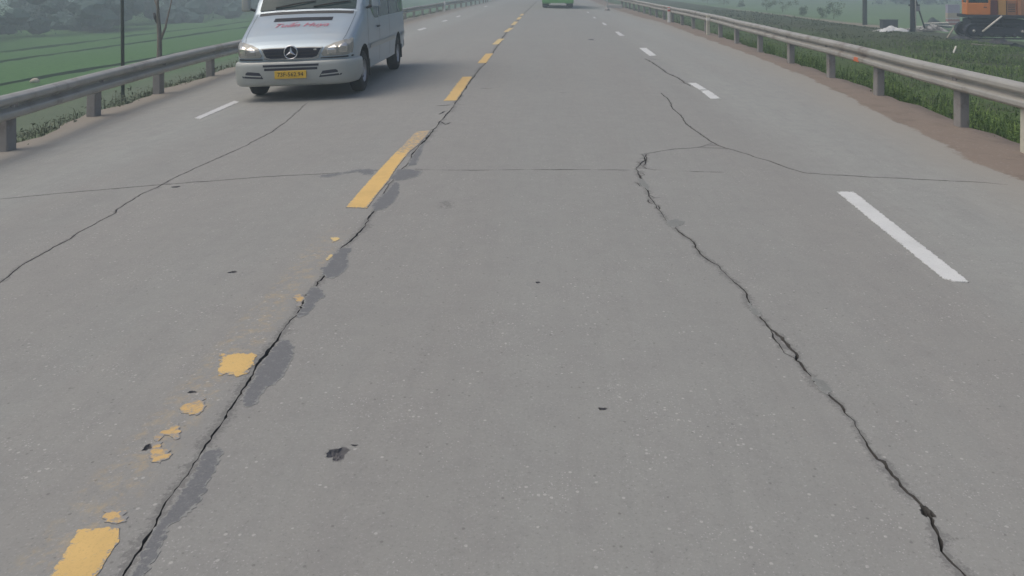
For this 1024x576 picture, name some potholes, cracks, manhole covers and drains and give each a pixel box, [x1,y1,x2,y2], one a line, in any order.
crack [636,93,1005,576]
crack [0,111,299,283]
pothole [326,447,349,461]
